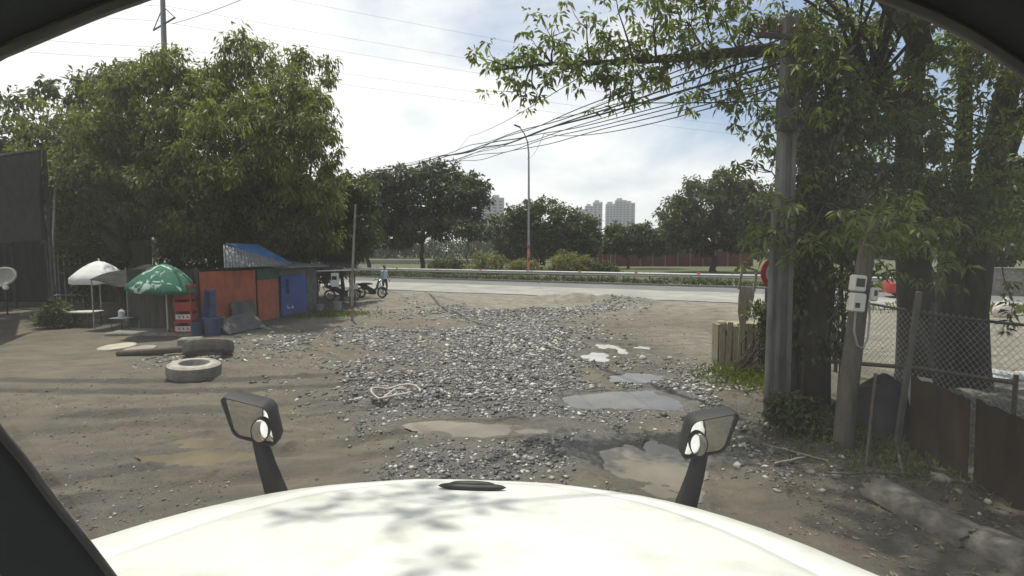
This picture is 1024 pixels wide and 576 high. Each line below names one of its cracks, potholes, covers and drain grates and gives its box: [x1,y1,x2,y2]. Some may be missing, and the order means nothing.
pothole [545,384,706,412]
pothole [557,430,731,514]
pothole [601,371,678,385]
pothole [570,347,618,364]
pothole [580,338,639,359]
pothole [383,415,611,442]
